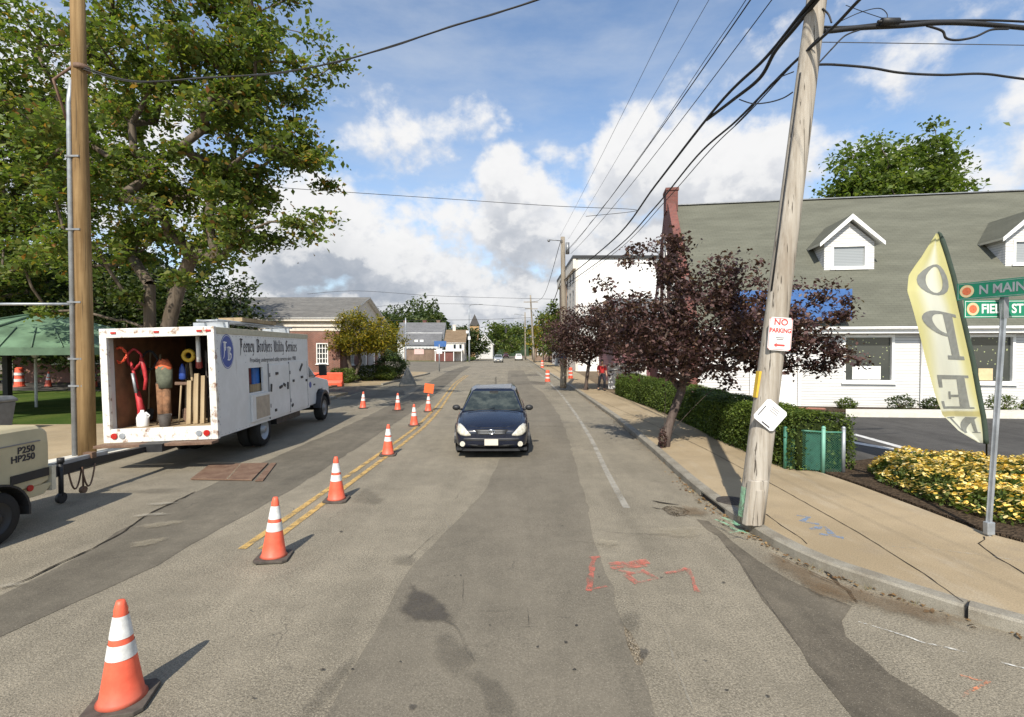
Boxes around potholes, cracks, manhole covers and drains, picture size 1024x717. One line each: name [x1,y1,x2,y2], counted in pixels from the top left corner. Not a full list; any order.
crack [825,571,857,602]
